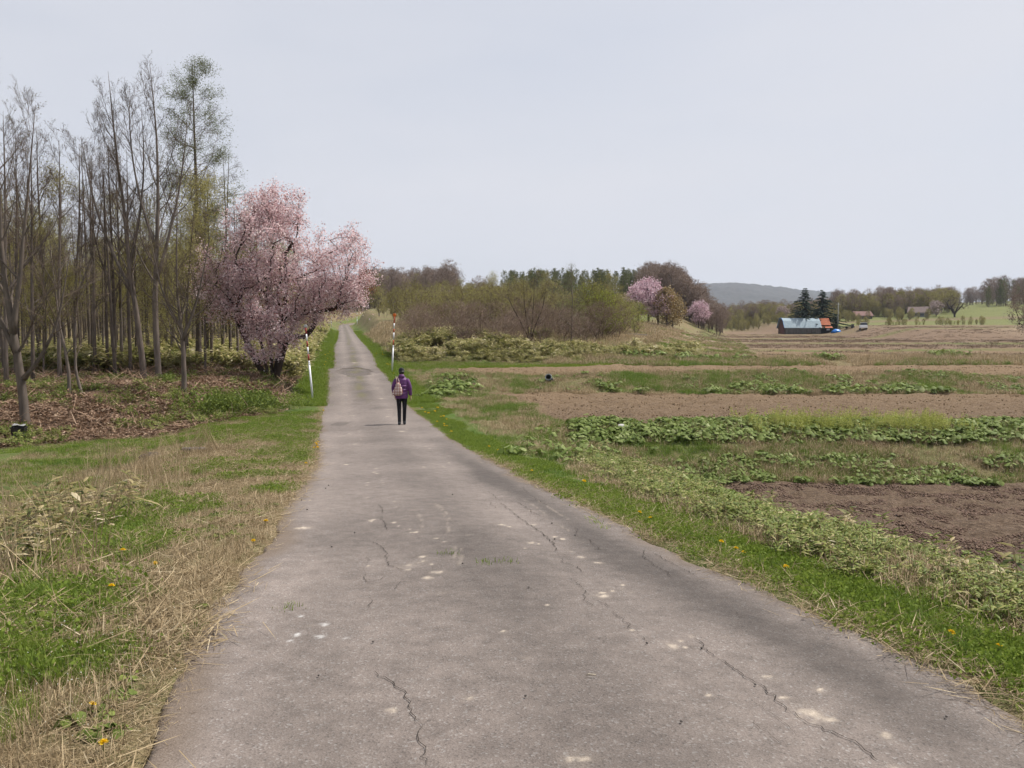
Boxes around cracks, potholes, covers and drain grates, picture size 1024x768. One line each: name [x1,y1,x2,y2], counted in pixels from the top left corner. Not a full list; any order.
crack [700,641,880,761]
crack [358,504,411,607]
crack [489,487,647,641]
crack [375,671,434,765]
